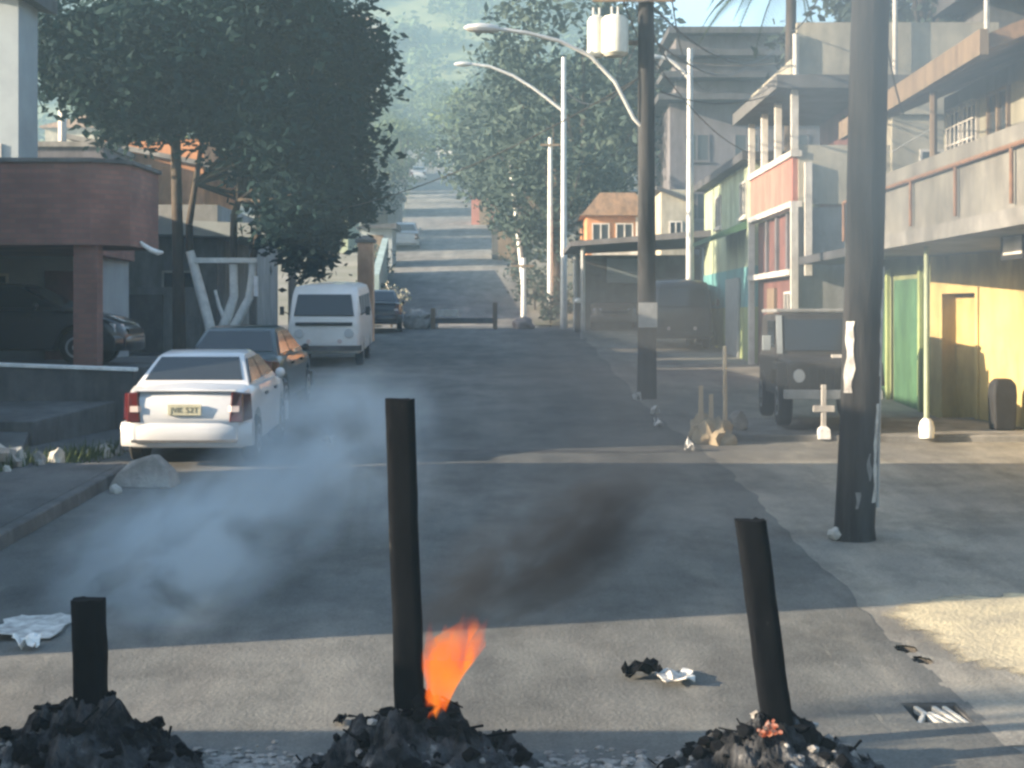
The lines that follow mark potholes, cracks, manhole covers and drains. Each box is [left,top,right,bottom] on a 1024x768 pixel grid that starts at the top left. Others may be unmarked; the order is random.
drain grate [900,703,975,723]
